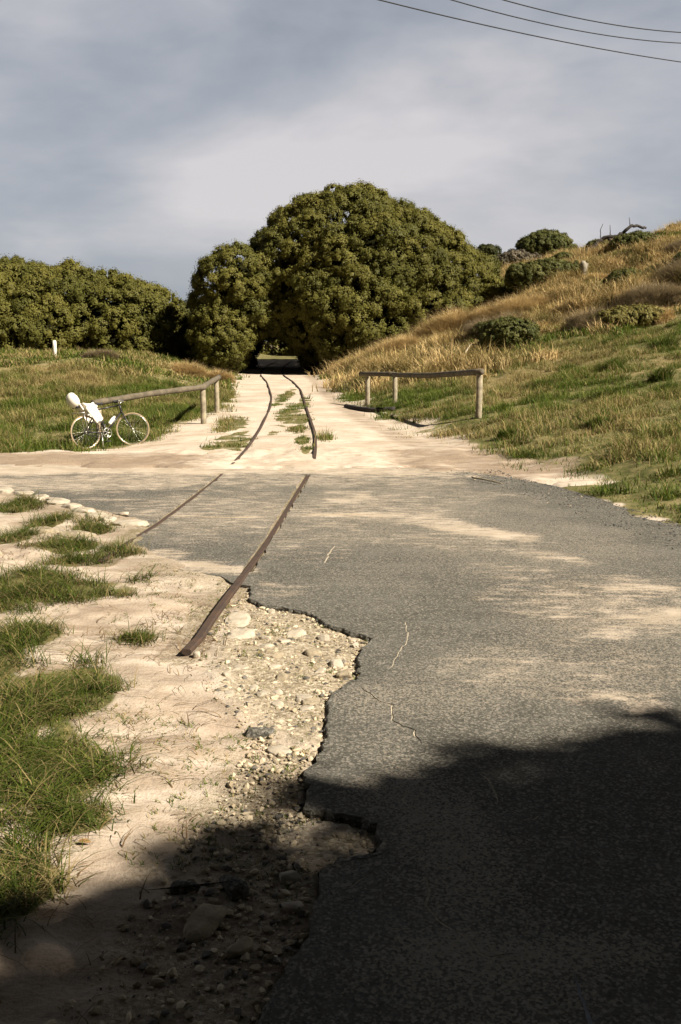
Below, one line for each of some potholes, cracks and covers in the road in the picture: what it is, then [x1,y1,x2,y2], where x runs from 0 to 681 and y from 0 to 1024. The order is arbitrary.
pothole [273,807,388,882]
crack [361,687,421,742]
